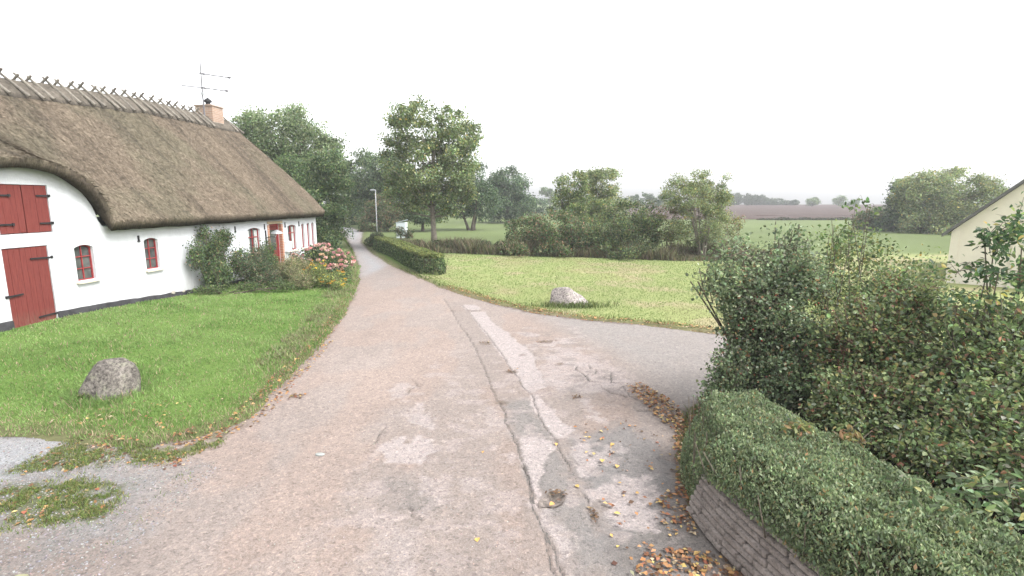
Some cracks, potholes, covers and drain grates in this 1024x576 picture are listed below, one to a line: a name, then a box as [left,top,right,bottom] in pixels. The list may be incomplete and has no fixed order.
crack [451,311,570,576]
